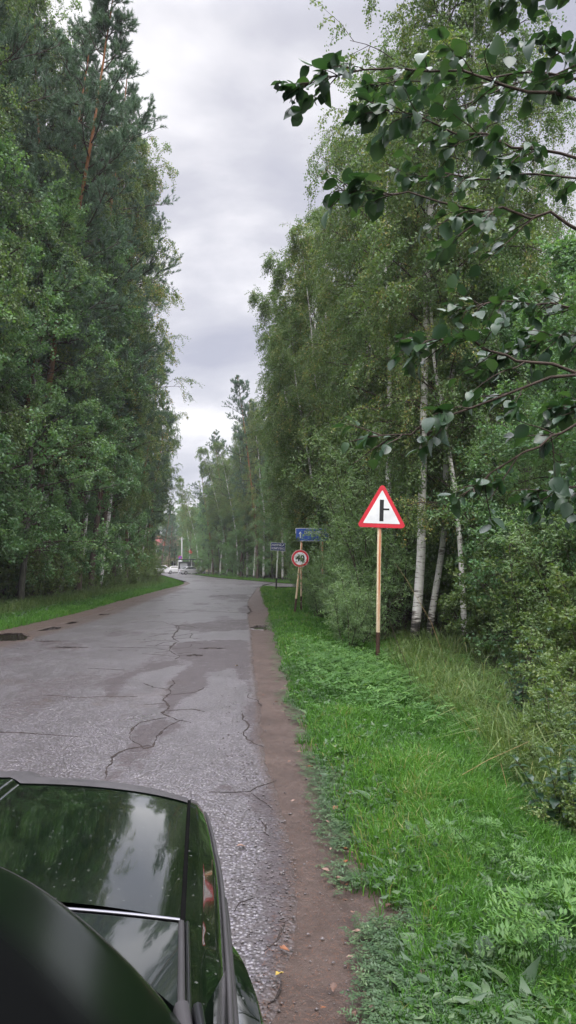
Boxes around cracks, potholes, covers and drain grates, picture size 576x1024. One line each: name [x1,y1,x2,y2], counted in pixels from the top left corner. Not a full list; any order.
crack [241,694,264,747]
pothole [0,632,35,642]
crack [224,780,277,836]
crack [43,680,204,778]
